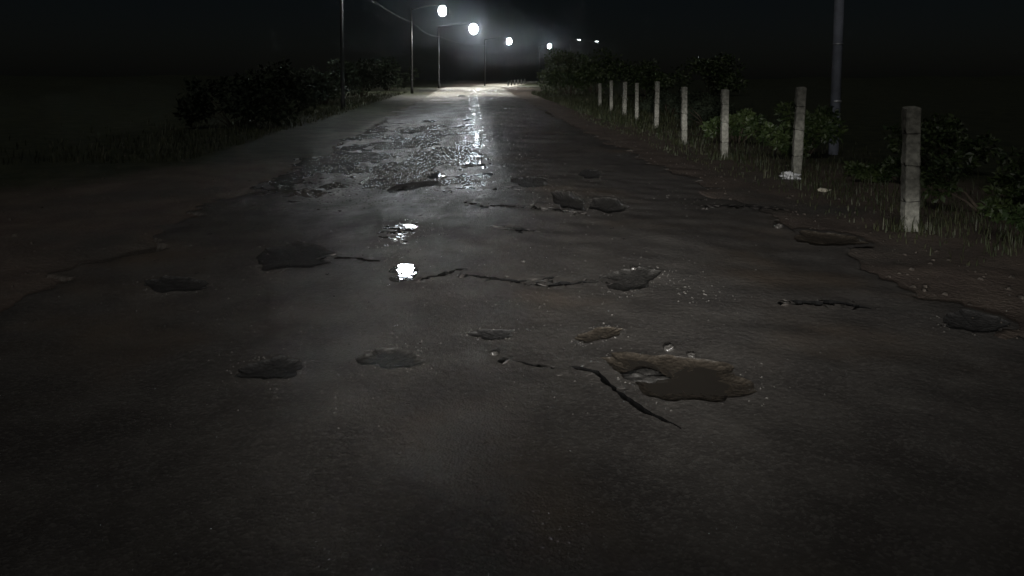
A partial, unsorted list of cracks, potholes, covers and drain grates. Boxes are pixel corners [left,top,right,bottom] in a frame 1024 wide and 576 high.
pothole [228,352,309,384]
pothole [595,349,765,407]
crack [410,266,619,289]
pothole [139,274,213,297]
pothole [252,240,340,274]
pothole [936,307,1019,336]
pothole [569,324,627,346]
pothole [463,326,519,344]
pothole [789,228,875,248]
pothole [595,265,664,295]
crack [778,297,883,312]
pothole [583,196,632,215]
